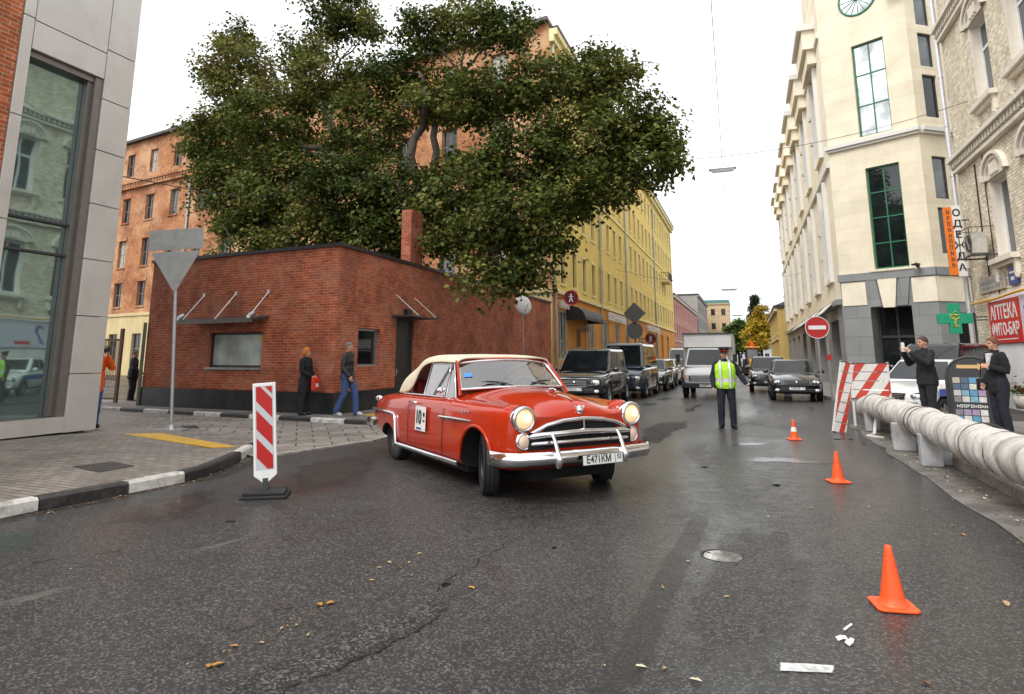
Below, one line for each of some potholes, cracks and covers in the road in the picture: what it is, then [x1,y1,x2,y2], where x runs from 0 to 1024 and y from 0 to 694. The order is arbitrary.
utility cover [73,461,135,473]
crack [282,609,446,694]
manhole cover [700,549,746,563]
crack [437,541,508,591]
